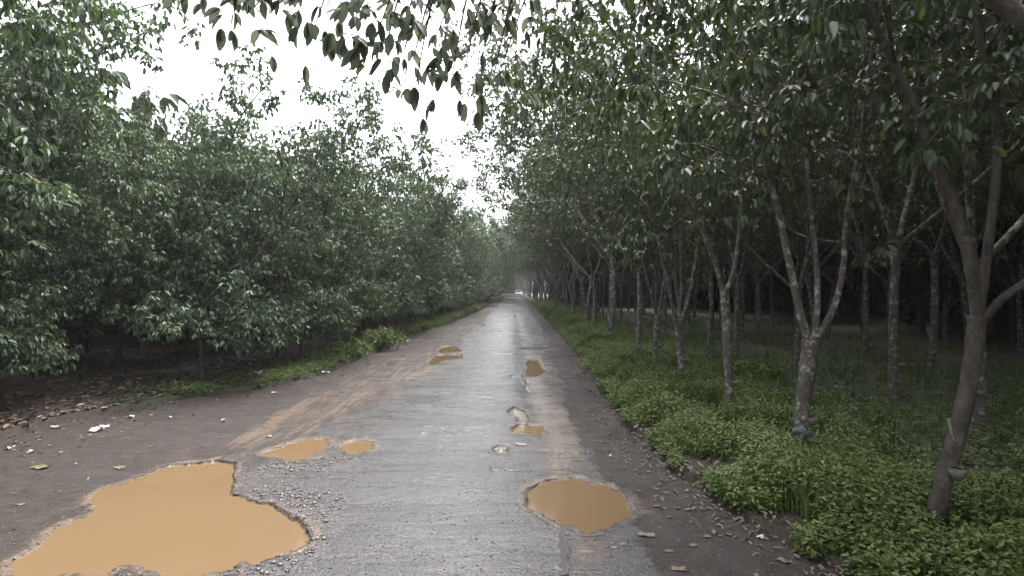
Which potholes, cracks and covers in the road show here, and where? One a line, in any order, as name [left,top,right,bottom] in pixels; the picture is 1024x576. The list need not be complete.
pothole [332,438,380,455]
pothole [253,436,335,463]
crack [552,524,572,576]
pothole [523,358,550,377]
pothole [503,405,533,423]
pothole [518,474,645,536]
pothole [487,443,513,455]
pothole [424,353,465,365]
pothole [0,457,323,576]
pothole [435,345,464,353]
pothole [507,422,549,436]
